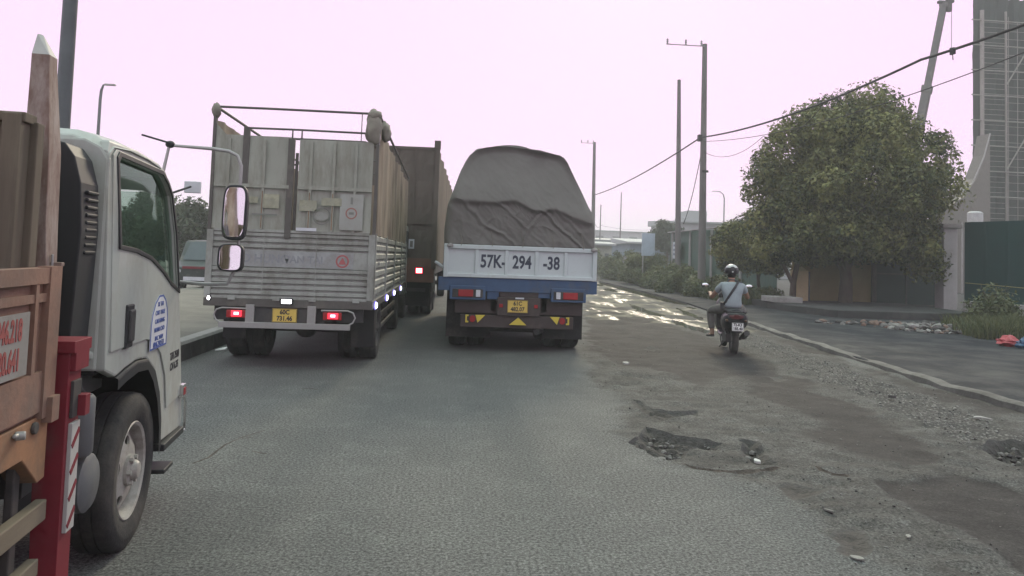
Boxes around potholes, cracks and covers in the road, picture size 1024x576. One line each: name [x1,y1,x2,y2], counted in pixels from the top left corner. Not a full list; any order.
pothole [983,439,1024,470]
pothole [628,427,723,460]
pothole [633,399,698,421]
crack [192,430,267,464]
pothole [738,438,778,466]
